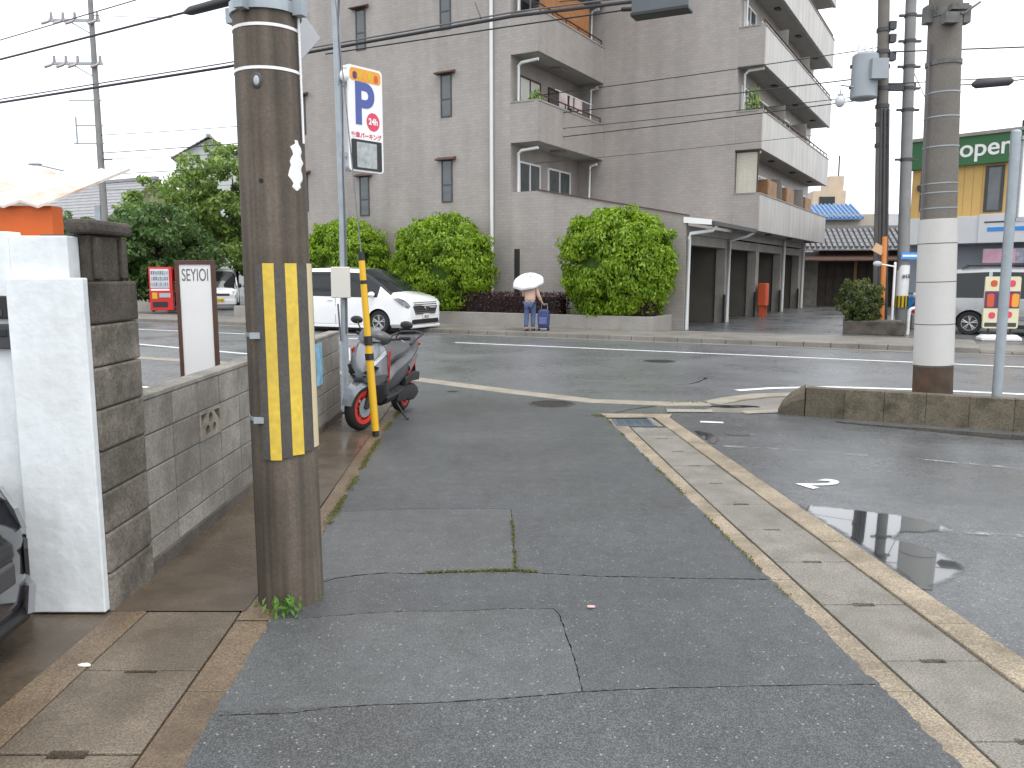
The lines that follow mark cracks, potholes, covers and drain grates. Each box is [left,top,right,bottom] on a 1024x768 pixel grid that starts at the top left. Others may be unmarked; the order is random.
crack [219,608,875,716]
drain grate [612,419,656,428]
manhole cover [527,400,576,408]
